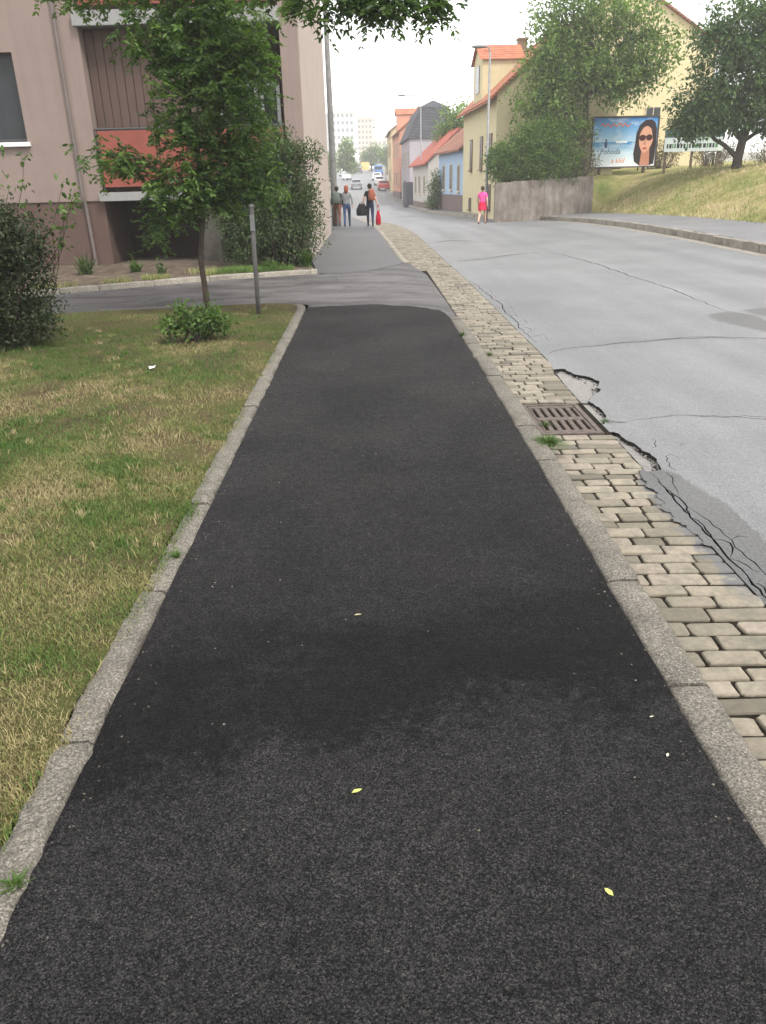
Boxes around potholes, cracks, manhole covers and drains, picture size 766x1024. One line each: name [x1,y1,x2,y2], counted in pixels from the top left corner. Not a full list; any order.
crack [560,336,766,350]
drain grate [523,403,604,436]
crack [469,280,539,340]
pothole [554,369,601,404]
crack [653,439,766,598]
crack [561,254,723,310]
